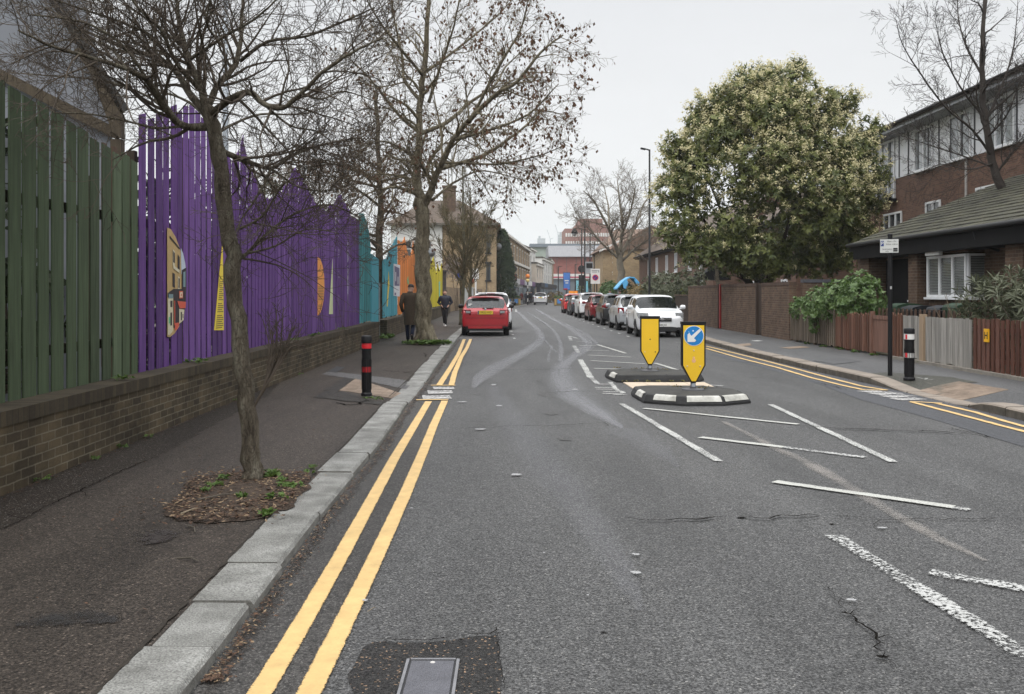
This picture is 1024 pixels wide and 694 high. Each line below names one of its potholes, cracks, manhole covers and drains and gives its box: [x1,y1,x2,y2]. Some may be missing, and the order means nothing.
manhole cover [397,658,460,694]
crack [825,585,897,672]
